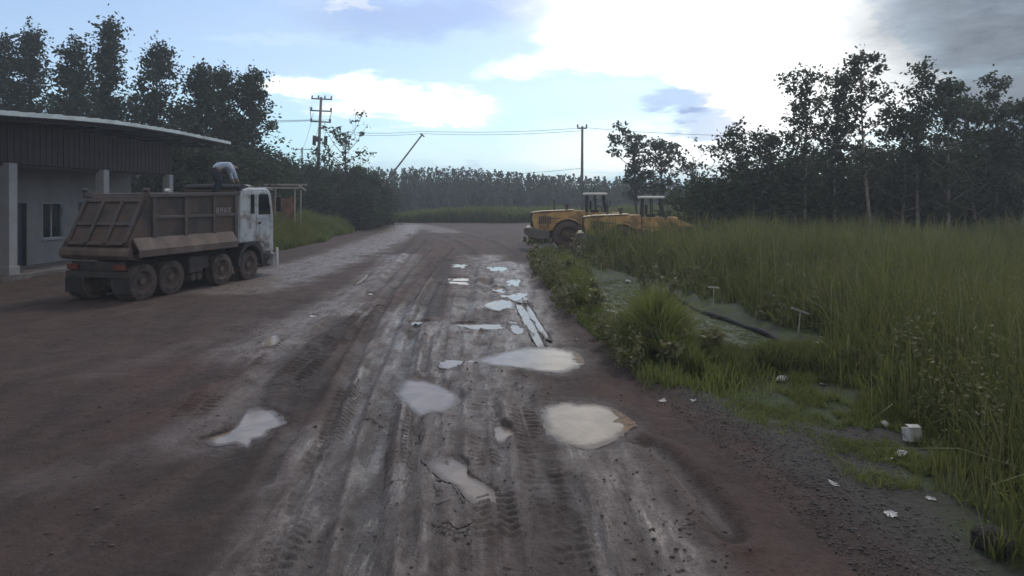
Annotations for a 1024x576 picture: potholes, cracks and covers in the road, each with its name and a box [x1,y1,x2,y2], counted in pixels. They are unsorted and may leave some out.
pothole [459,343,602,378]
pothole [191,403,298,454]
pothole [446,320,512,332]
pothole [385,370,472,422]
pothole [530,394,654,455]
pothole [421,450,507,510]
pothole [502,278,524,287]
pothole [429,354,477,373]
pothole [485,417,517,446]
pothole [259,334,284,348]
pothole [477,297,518,313]
